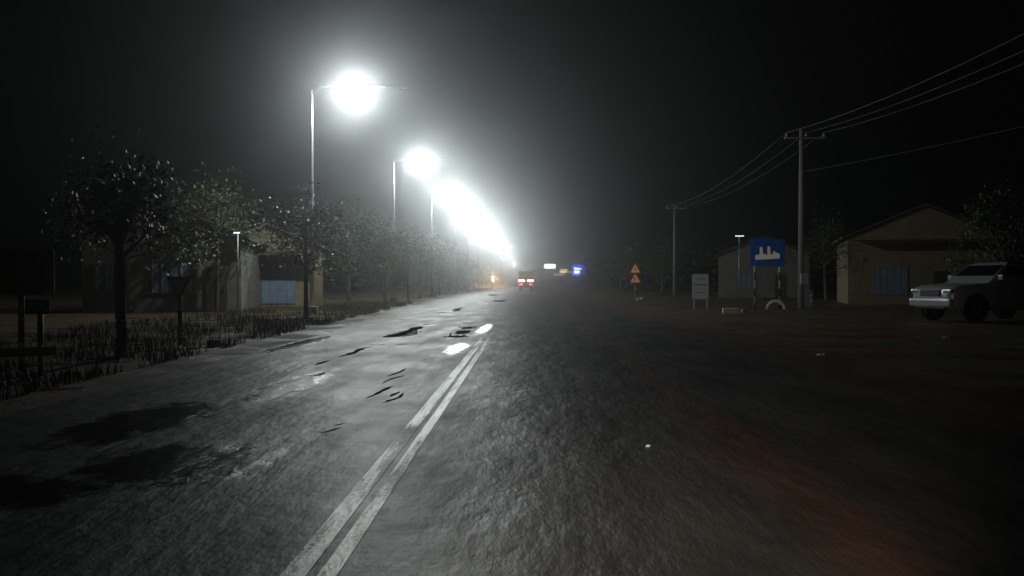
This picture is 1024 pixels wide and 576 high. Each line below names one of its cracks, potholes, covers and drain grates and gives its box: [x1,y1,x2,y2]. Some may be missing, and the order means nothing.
pothole [382,326,423,338]
